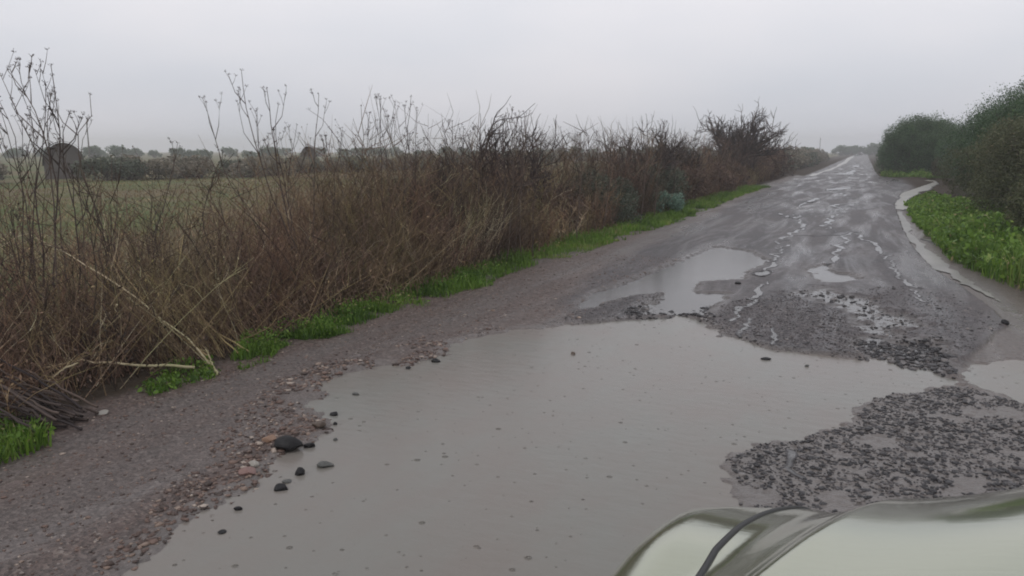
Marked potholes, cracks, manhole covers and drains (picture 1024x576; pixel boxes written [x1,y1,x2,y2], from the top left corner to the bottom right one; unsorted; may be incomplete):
pothole [783,286,970,371]
pothole [957,355,1024,403]
pothole [575,245,772,317]
pothole [804,263,864,282]
pothole [116,315,973,576]
